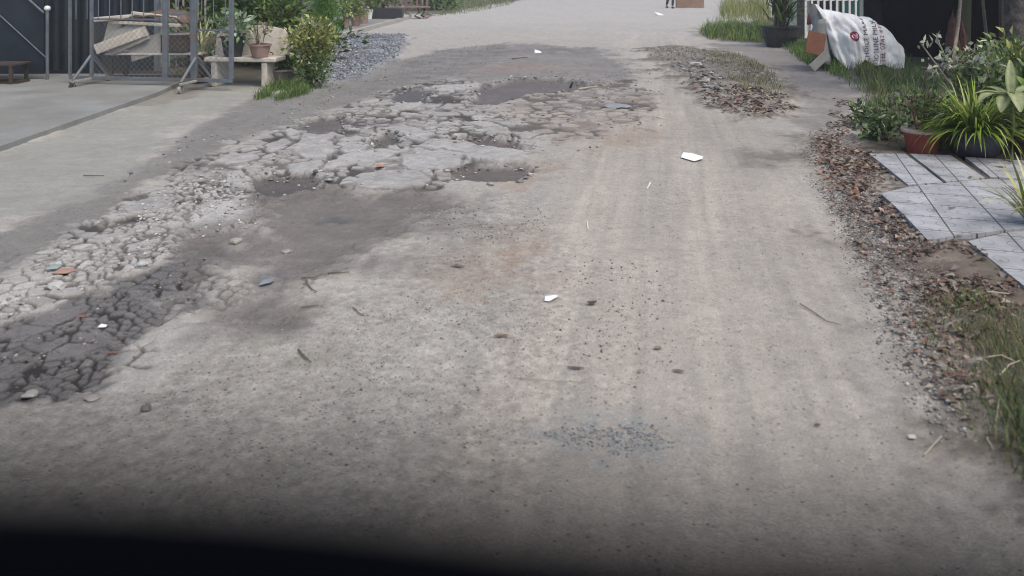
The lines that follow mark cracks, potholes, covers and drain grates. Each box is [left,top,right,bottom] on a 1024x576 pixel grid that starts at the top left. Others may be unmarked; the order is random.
pothole [449,163,537,182]
pothole [470,77,594,105]
pothole [389,87,432,103]
crack [0,79,670,402]
